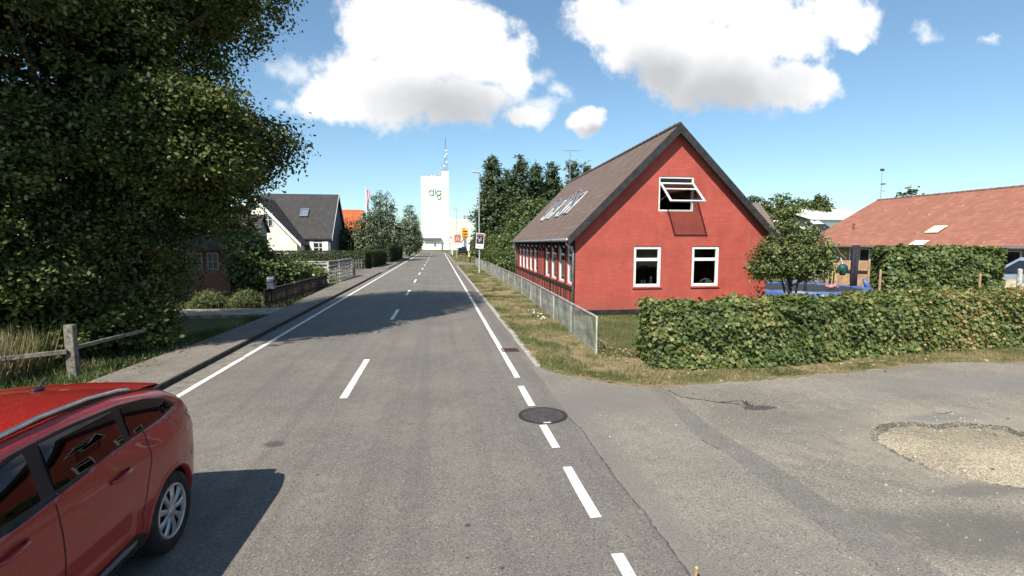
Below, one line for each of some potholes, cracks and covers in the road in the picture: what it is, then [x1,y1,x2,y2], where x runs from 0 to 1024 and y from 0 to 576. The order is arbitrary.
manhole cover [518,407,568,424]
pothole [868,421,1024,489]
